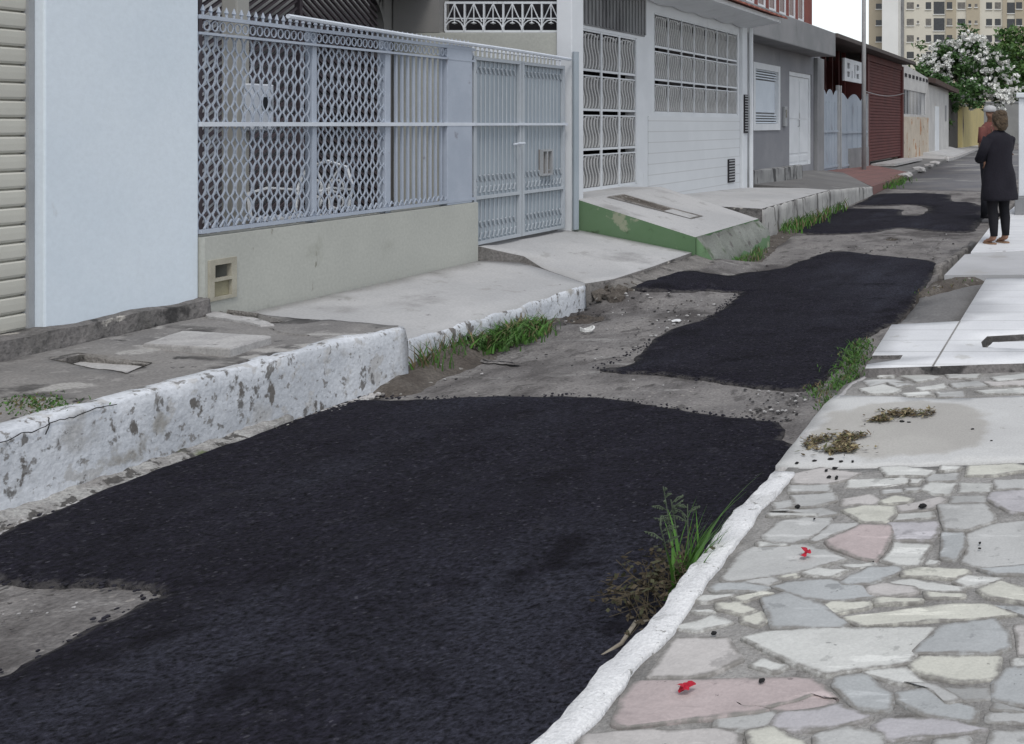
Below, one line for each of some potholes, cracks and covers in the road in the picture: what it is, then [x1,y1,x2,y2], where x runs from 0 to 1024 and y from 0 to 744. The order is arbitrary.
manhole cover [74,362,142,373]
crack [0,404,117,443]
